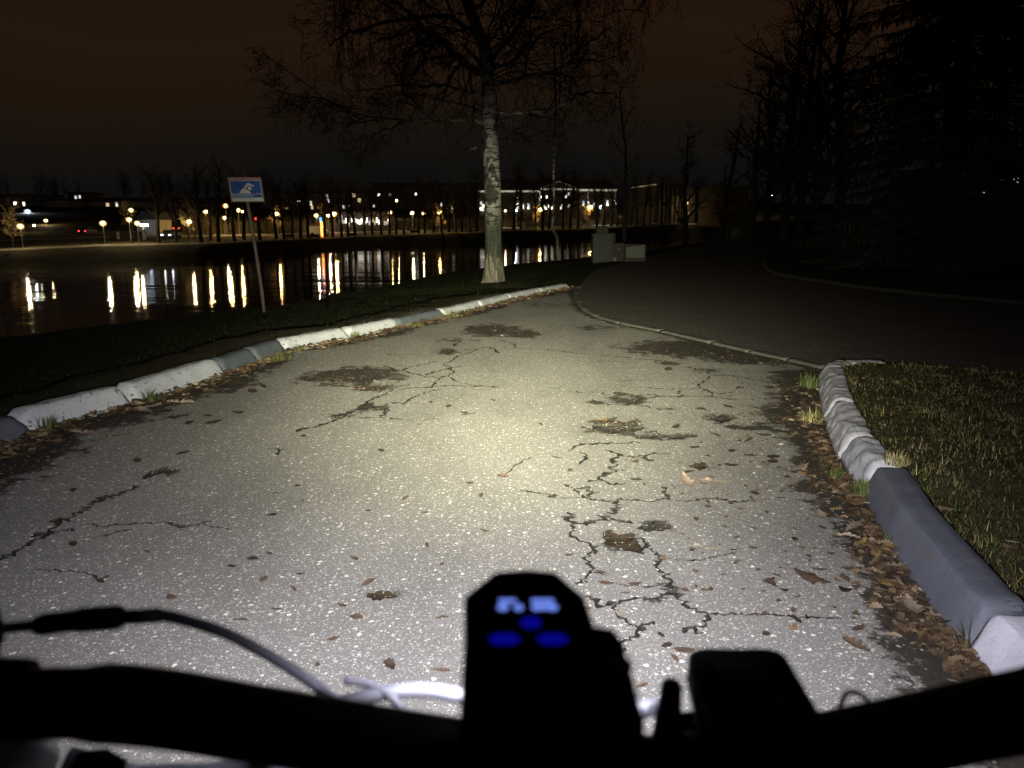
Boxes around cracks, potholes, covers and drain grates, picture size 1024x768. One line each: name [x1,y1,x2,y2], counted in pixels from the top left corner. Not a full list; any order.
crack [274,340,768,455]
crack [521,441,840,642]
pothole [602,530,644,554]
crack [0,485,228,580]
pothole [591,423,644,434]
